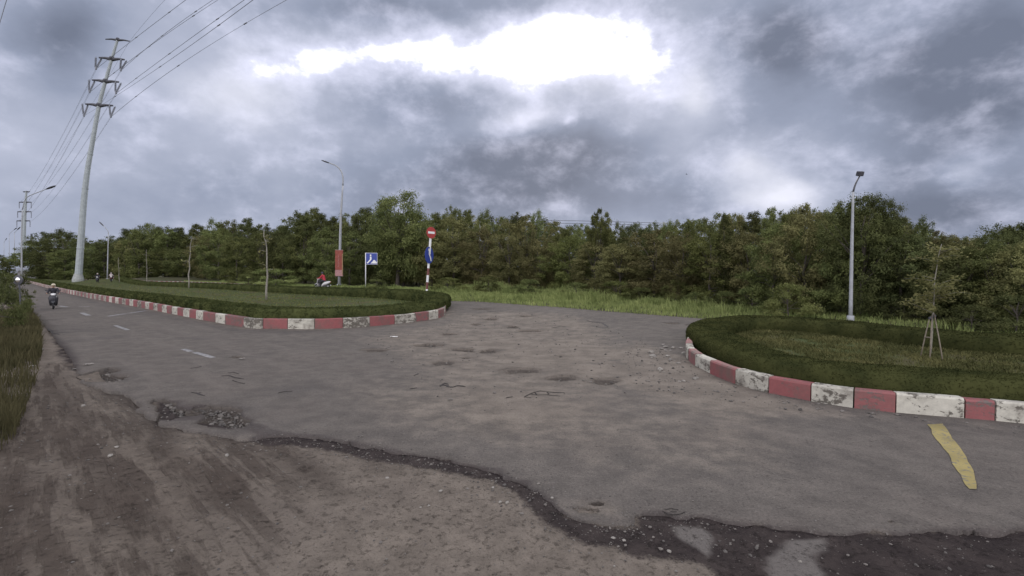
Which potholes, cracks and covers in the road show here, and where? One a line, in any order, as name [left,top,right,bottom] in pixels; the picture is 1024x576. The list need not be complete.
pothole [76,369,128,382]
pothole [185,406,251,428]
pothole [150,400,201,423]
